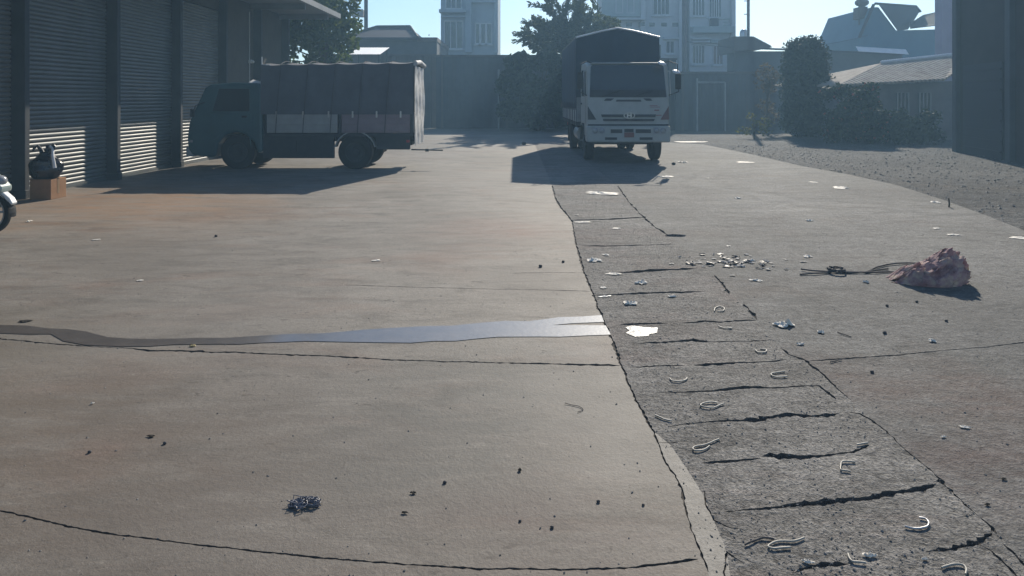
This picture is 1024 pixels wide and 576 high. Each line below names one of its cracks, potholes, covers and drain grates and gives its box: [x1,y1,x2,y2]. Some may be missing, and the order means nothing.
crack [595,275,1024,576]
